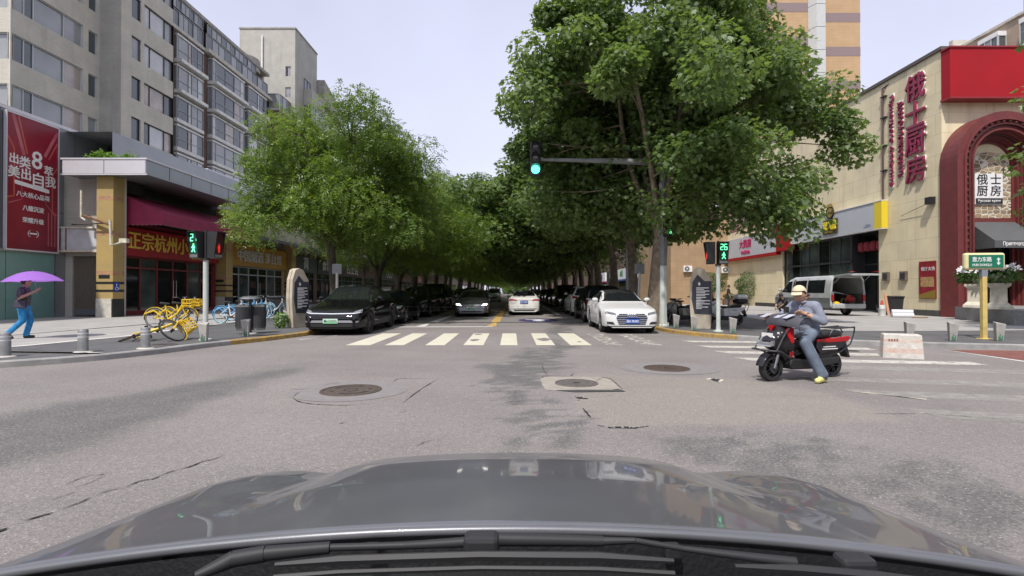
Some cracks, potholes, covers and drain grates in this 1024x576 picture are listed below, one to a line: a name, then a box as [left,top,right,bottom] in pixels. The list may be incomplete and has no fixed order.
manhole cover [319,384,382,396]
manhole cover [555,379,598,387]
crack [0,457,218,531]
